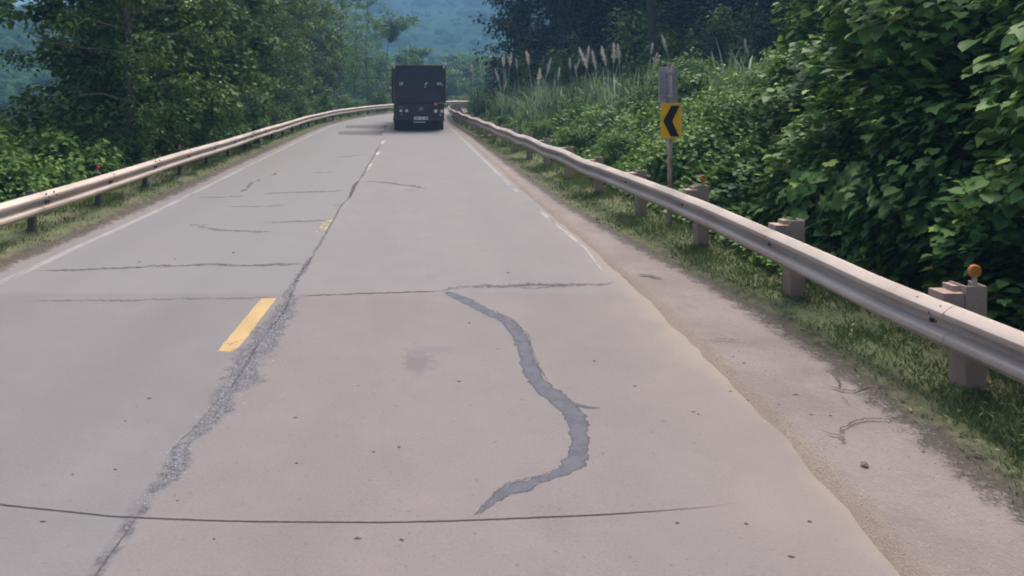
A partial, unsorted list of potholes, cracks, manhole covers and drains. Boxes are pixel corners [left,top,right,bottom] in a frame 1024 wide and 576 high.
crack [33,263,300,271]
crack [200,220,323,232]
crack [822,417,894,441]
crack [0,502,736,523]
crack [827,372,868,391]
